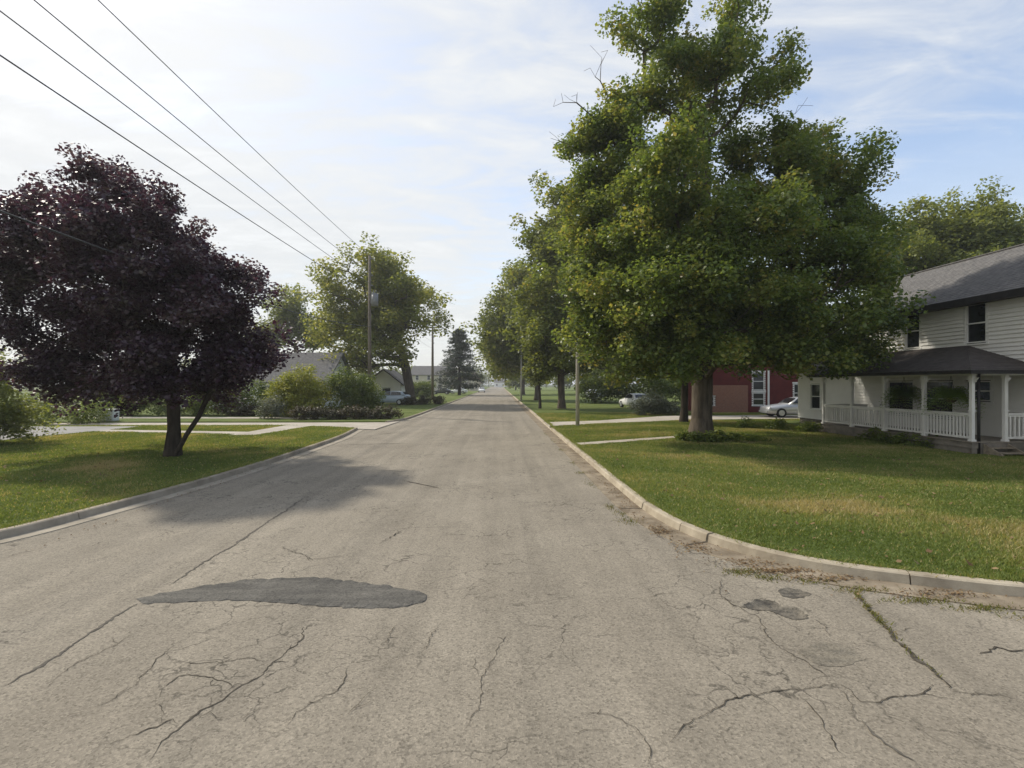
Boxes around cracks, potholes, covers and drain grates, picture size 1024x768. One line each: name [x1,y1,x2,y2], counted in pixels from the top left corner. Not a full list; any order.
crack [575,570,1015,766]
crack [289,666,370,723]
crack [980,646,1024,654]
crack [468,634,510,725]
crack [96,625,310,761]
